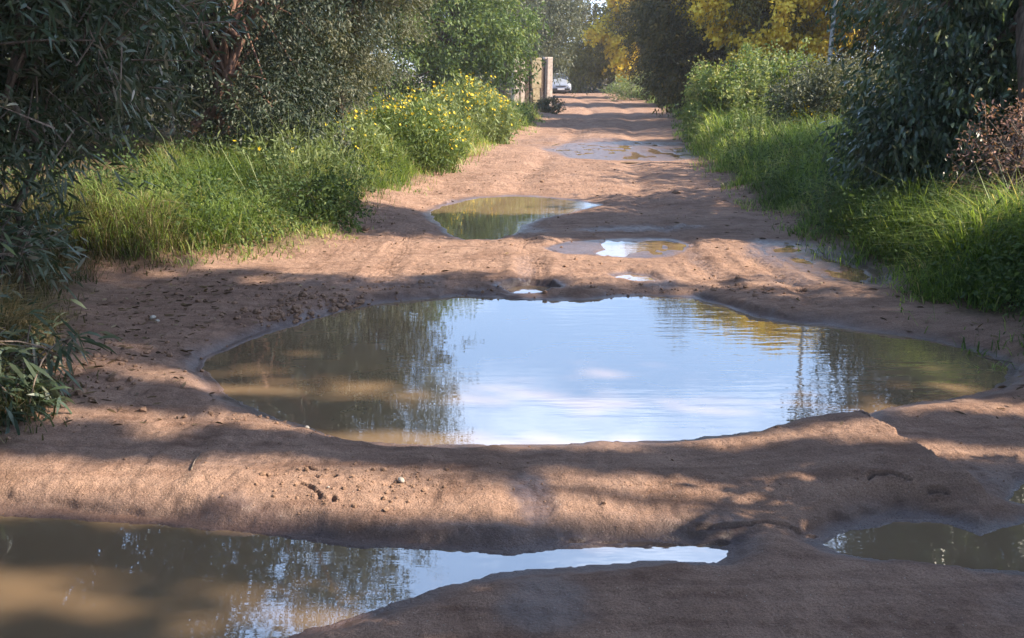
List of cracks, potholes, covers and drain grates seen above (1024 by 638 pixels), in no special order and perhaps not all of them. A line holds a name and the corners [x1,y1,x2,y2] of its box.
pothole [542,238,696,258]
pothole [422,194,605,240]
pothole [543,141,699,163]
pothole [0,503,747,638]
pothole [185,288,1024,449]
pothole [610,272,661,281]
pothole [500,280,558,294]
pothole [805,510,1024,576]
